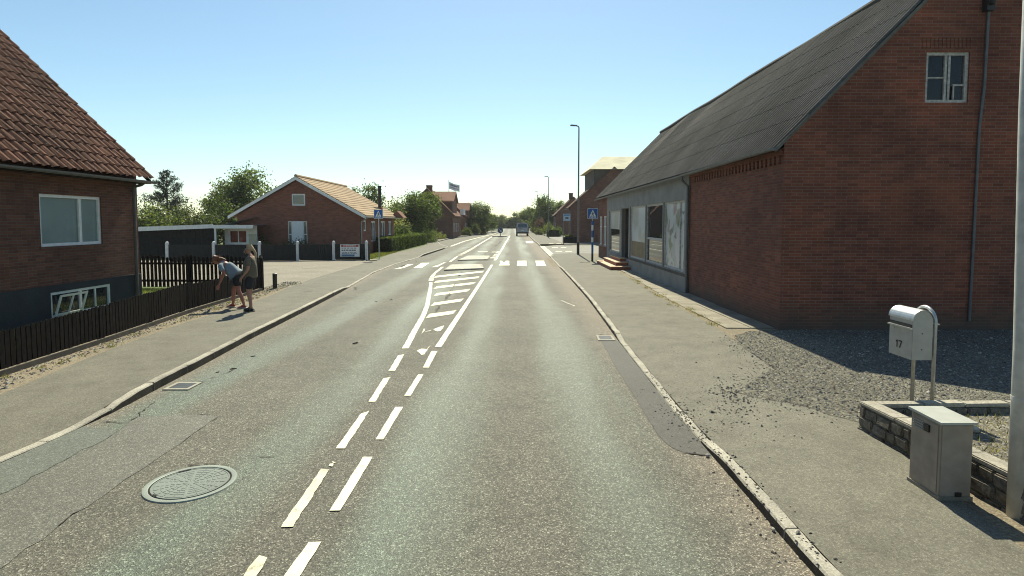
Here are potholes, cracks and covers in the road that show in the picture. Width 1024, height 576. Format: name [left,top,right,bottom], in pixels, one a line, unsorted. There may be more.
crack [4,403,216,553]
drain grate [162,382,202,390]
manhole cover [141,465,238,504]
